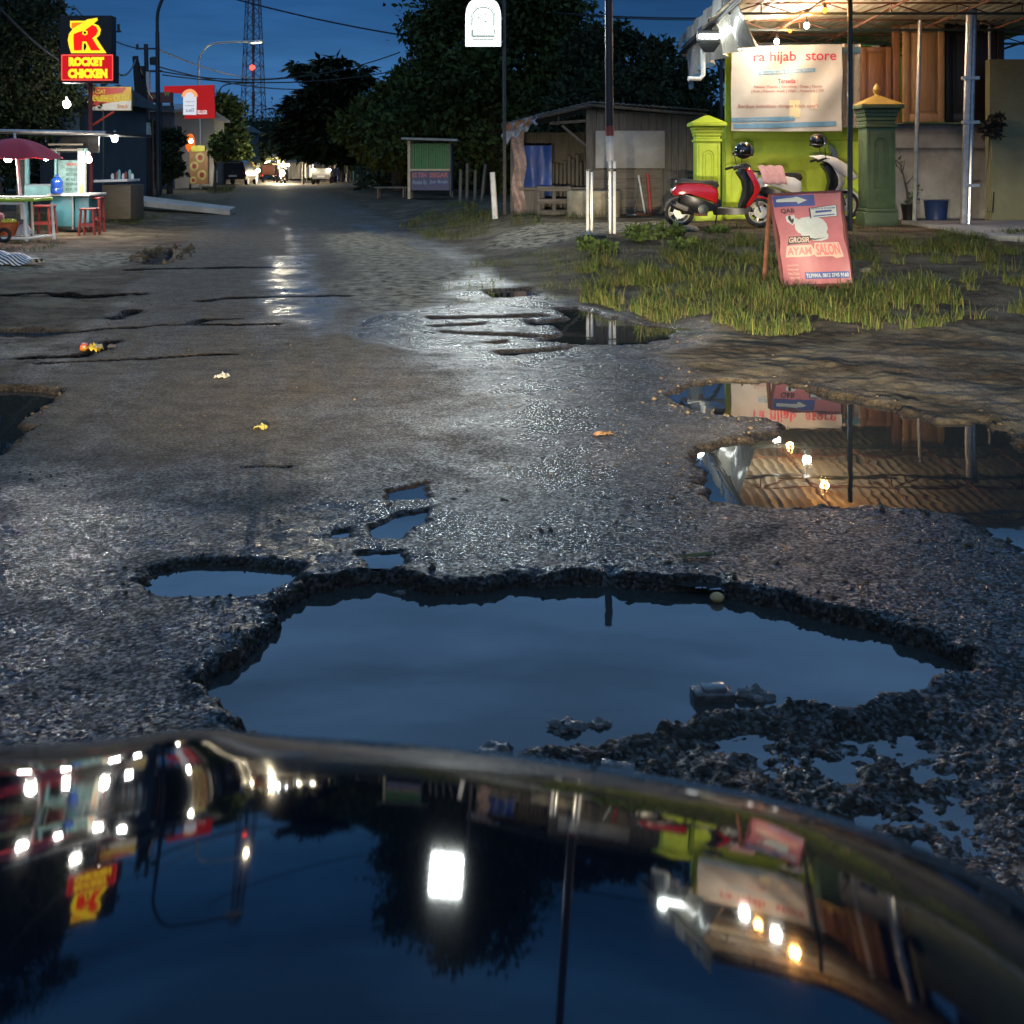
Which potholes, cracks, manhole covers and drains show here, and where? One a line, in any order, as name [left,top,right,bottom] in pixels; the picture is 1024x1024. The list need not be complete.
pothole [0,382,81,465]
pothole [468,285,554,299]
pothole [644,375,1024,624]
crack [0,291,360,365]
pothole [133,553,1024,857]
pothole [396,303,705,361]
pothole [285,470,471,592]
pothole [104,551,327,614]
pothole [123,246,195,266]
